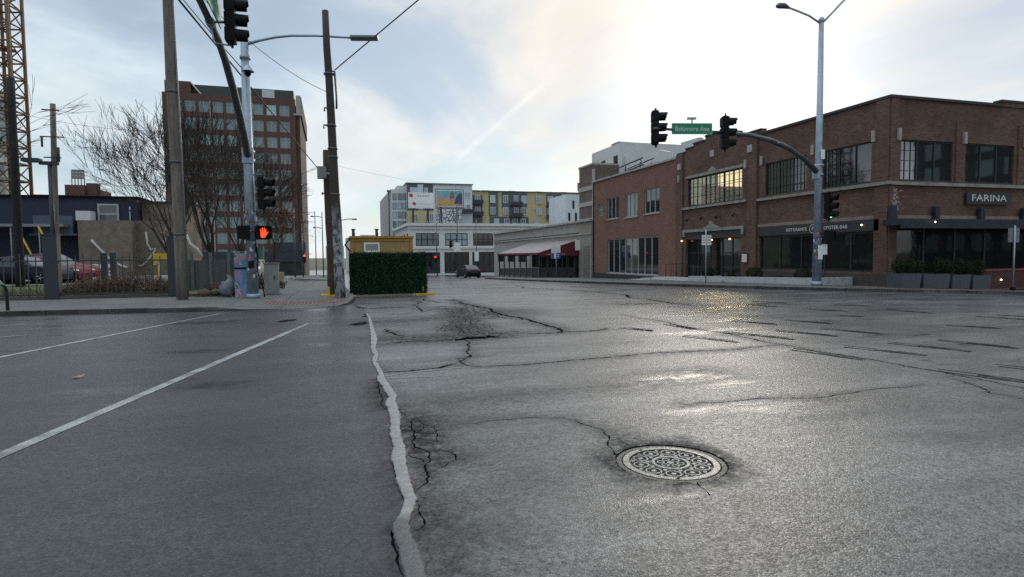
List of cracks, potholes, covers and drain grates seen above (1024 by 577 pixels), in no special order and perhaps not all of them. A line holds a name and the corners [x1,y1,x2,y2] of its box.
crack [685,384,925,405]
crack [377,298,763,577]
manhole cover [615,444,729,485]
